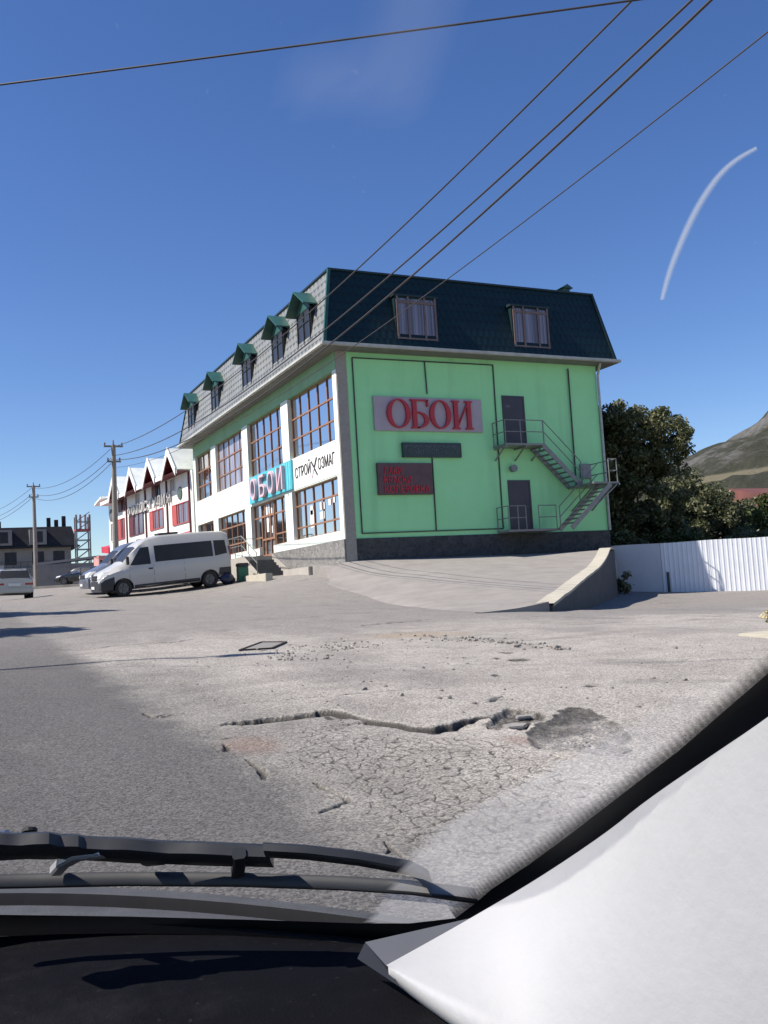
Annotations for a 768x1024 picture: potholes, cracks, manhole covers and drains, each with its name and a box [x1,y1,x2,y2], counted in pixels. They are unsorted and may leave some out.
pothole [477,707,555,732]
crack [206,695,605,862]
manhole cover [238,641,287,651]
